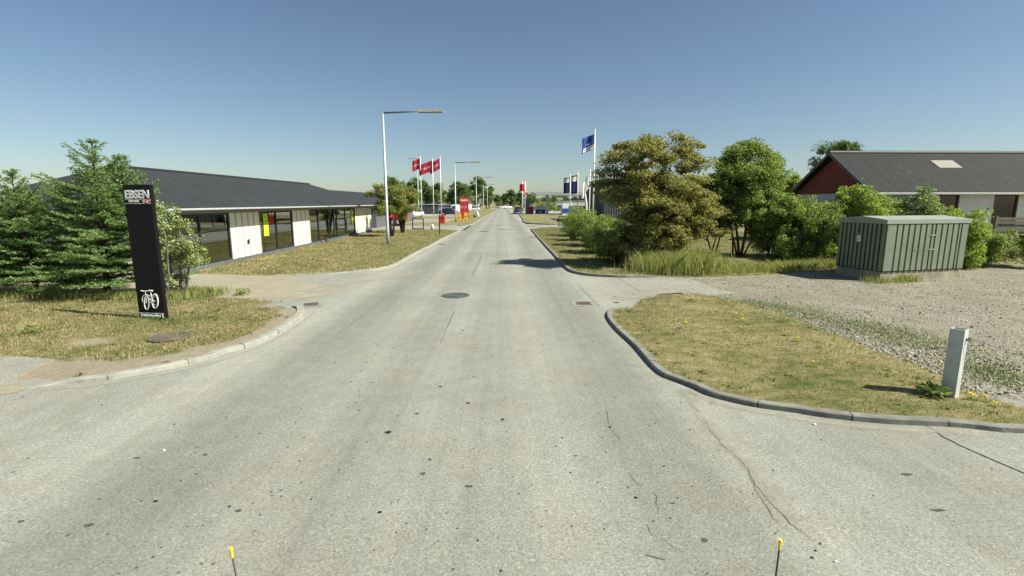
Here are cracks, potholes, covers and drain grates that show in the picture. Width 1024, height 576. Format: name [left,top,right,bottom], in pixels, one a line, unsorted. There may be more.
crack [630,474,676,560]
manhole cover [147,331,192,342]
crack [933,429,1024,473]
crack [691,404,804,534]
